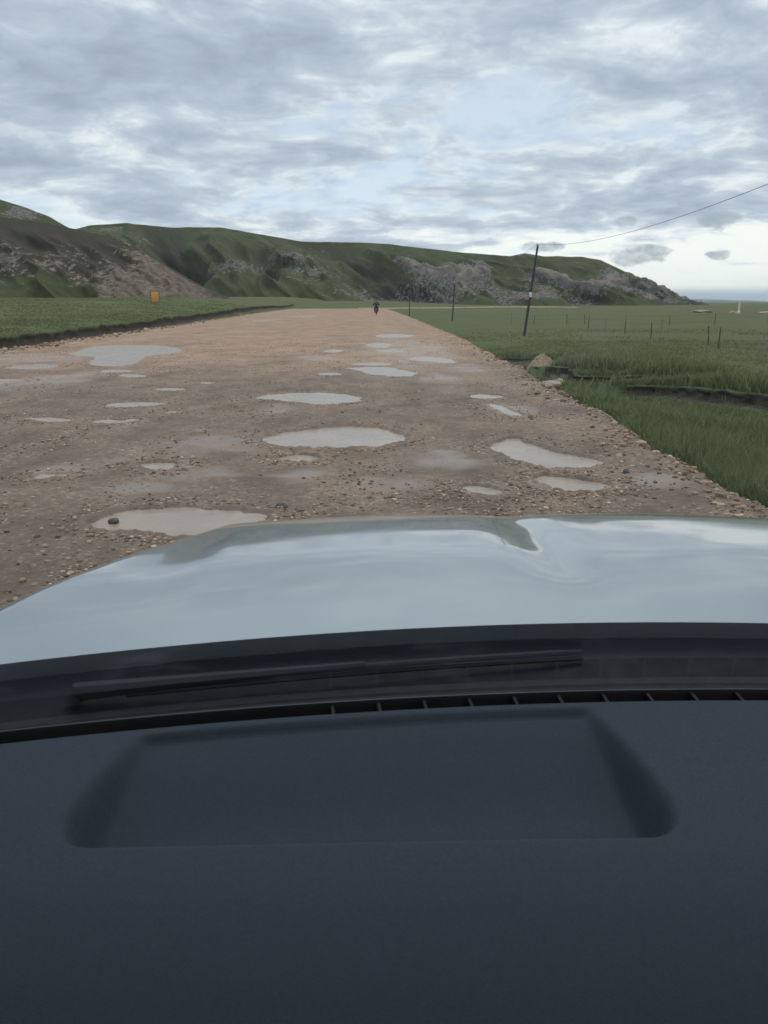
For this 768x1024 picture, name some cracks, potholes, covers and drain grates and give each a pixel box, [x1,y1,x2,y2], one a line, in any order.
pothole [247,423,420,451]
pothole [336,365,427,378]
pothole [63,345,189,367]
pothole [246,391,374,406]
pothole [95,400,176,408]
pothole [123,458,190,473]
pothole [401,356,464,364]
pothole [481,402,531,417]
